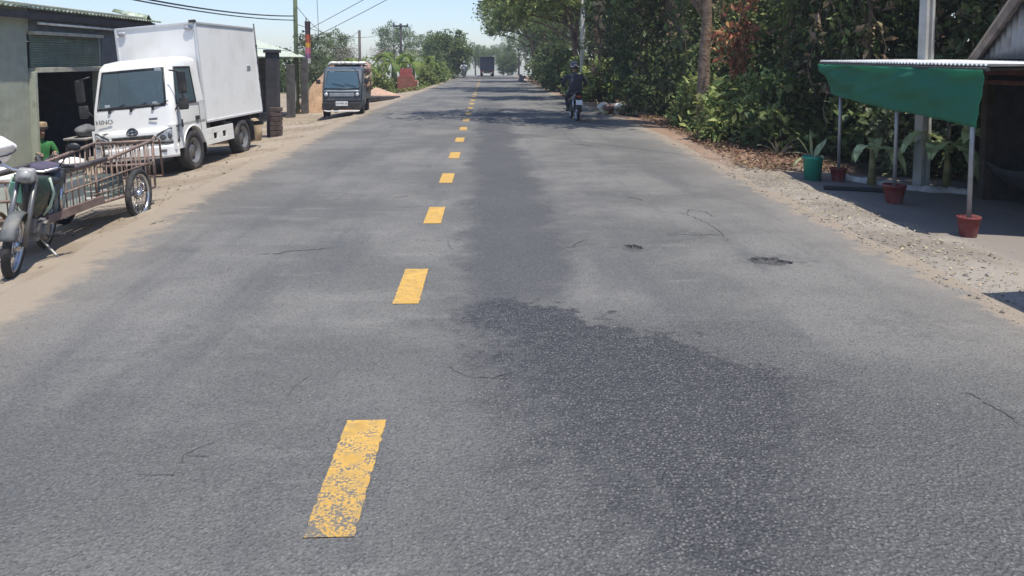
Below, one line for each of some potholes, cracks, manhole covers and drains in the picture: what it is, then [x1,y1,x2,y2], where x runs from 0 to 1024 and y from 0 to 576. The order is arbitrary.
pothole [751,257,793,266]
crack [146,441,223,475]
